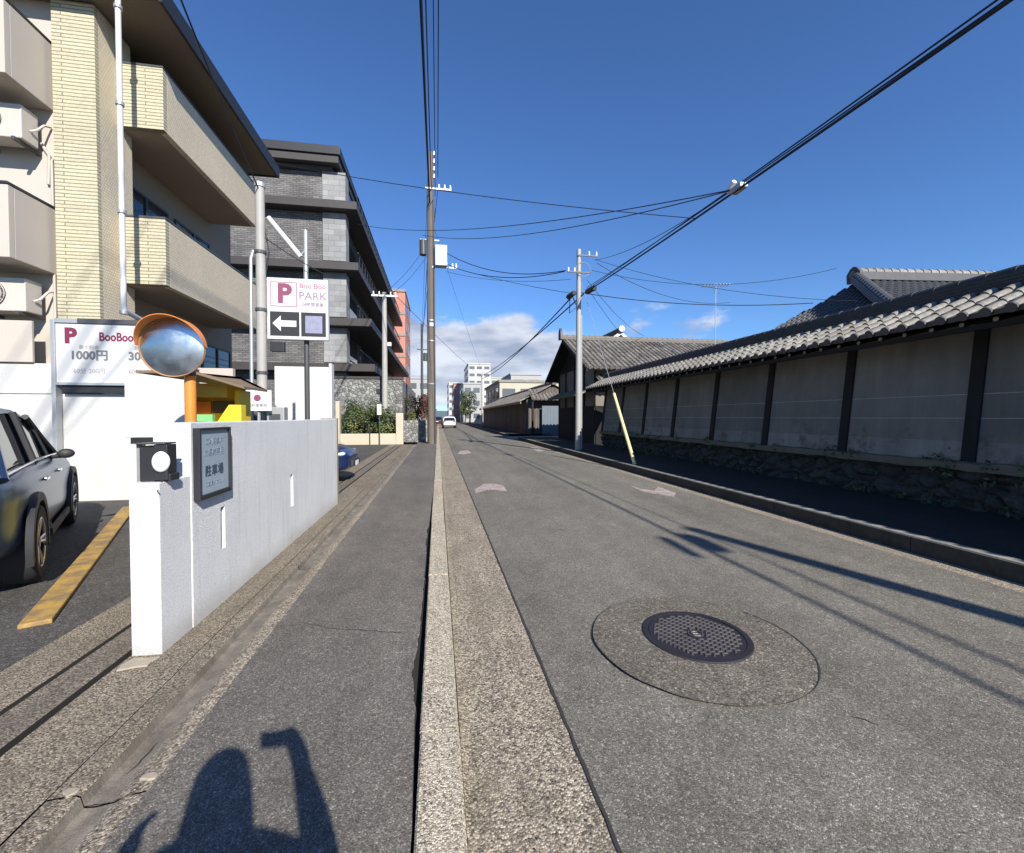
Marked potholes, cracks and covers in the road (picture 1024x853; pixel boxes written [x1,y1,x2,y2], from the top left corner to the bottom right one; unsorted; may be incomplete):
manhole cover [642,611,755,664]
